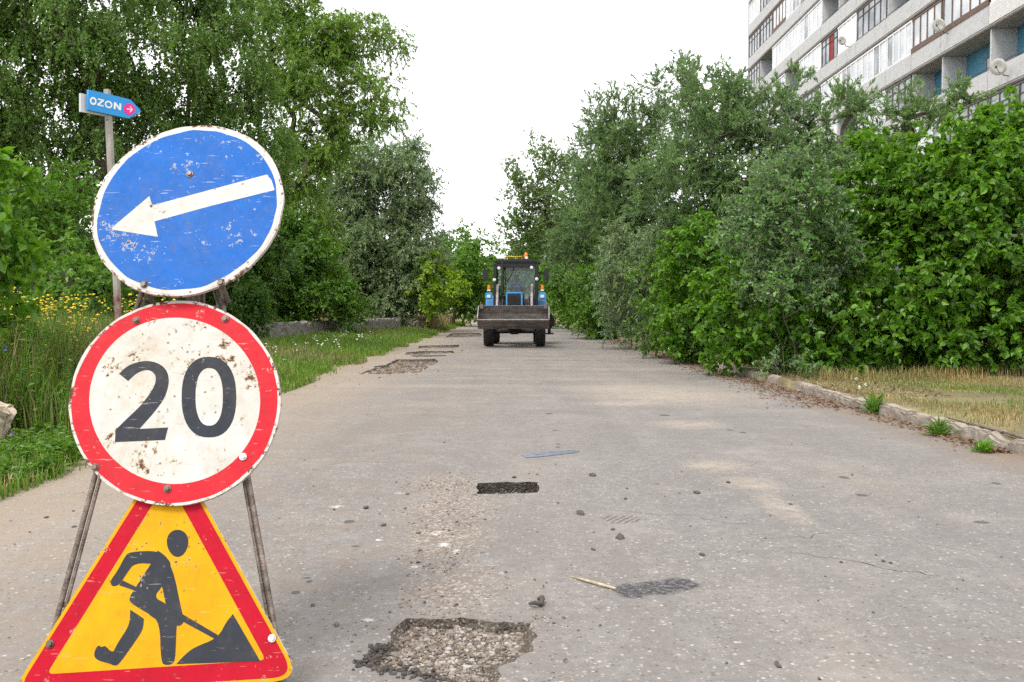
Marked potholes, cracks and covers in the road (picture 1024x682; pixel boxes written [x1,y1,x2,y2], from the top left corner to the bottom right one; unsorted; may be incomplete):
pothole [361,359,438,374]
crack [779,533,972,576]
pothole [352,617,537,682]
